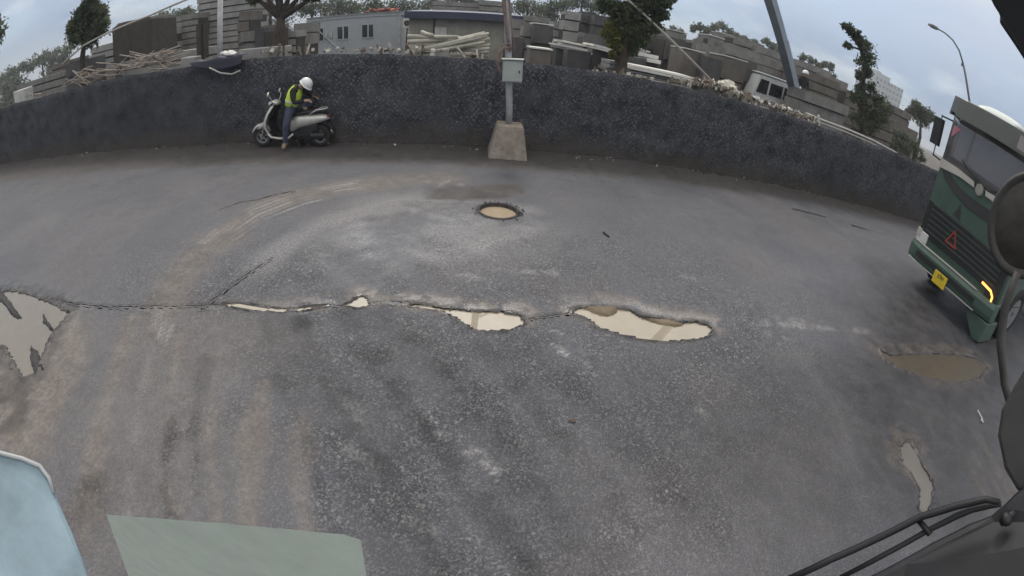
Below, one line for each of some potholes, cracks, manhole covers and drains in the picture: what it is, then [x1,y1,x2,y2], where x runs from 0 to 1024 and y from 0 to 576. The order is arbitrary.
pothole [0,285,77,383]
crack [202,257,275,310]
crack [792,208,898,239]
manhole cover [472,200,524,222]
pothole [897,438,937,513]
pothole [223,302,326,314]
pothole [342,295,373,310]
crack [216,191,294,211]
pothole [372,300,531,335]
pothole [878,348,991,385]
pothole [563,304,718,344]
